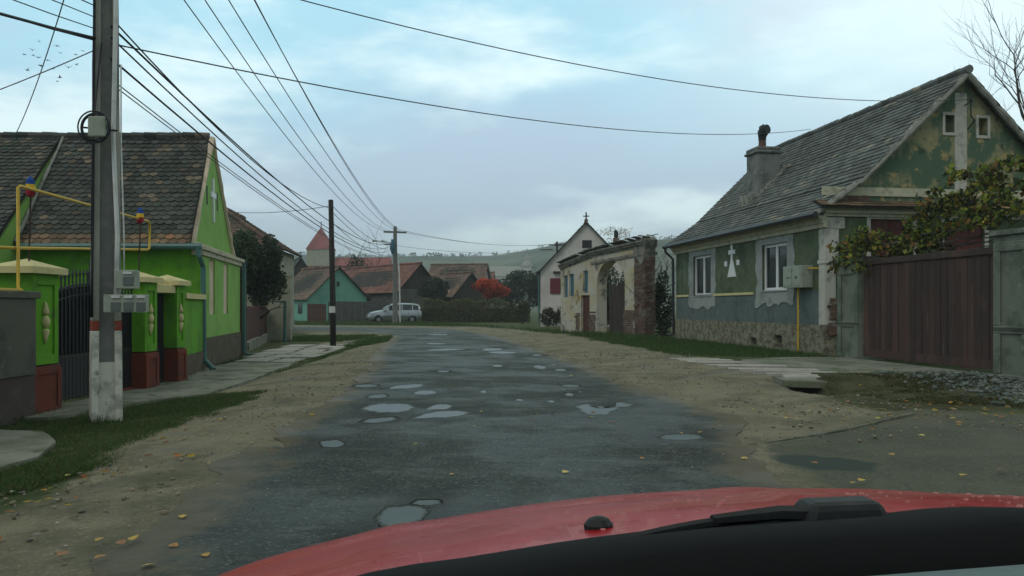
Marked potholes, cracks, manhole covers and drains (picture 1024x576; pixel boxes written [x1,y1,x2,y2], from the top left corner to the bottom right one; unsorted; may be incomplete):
pothole [360,403,418,413]
pothole [574,401,635,415]
pothole [408,410,471,419]
pothole [357,416,401,424]
pothole [373,504,431,527]
pothole [318,439,346,448]
